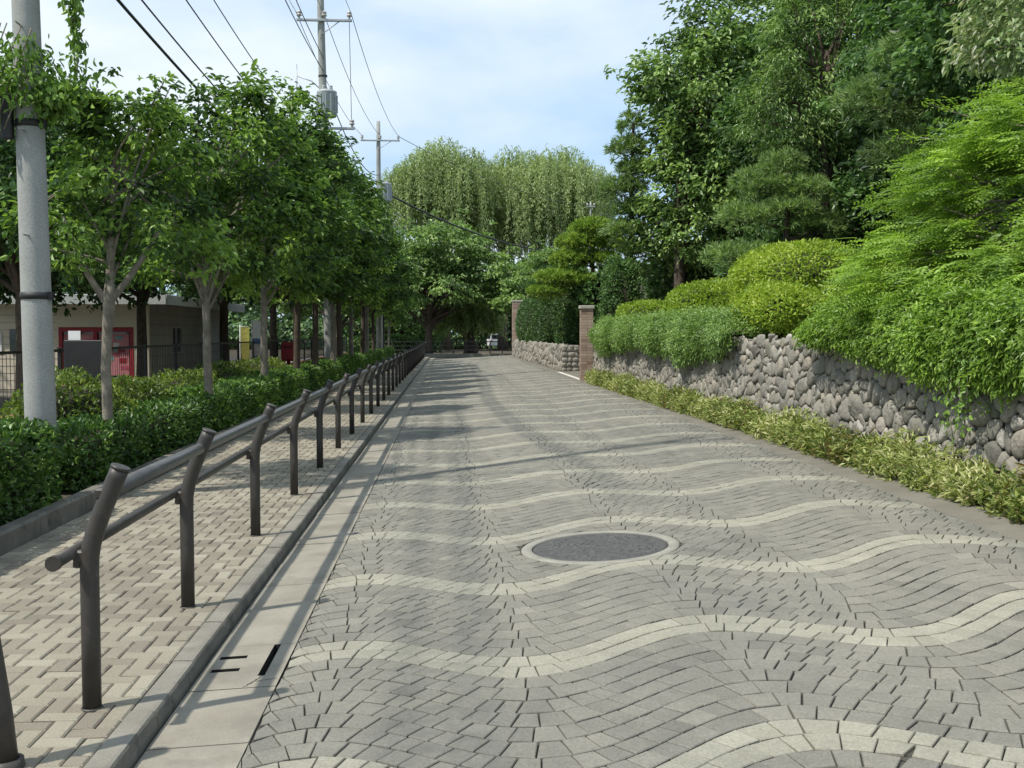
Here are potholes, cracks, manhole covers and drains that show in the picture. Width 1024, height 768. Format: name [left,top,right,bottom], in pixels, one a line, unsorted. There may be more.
manhole cover [521,530,680,566]
